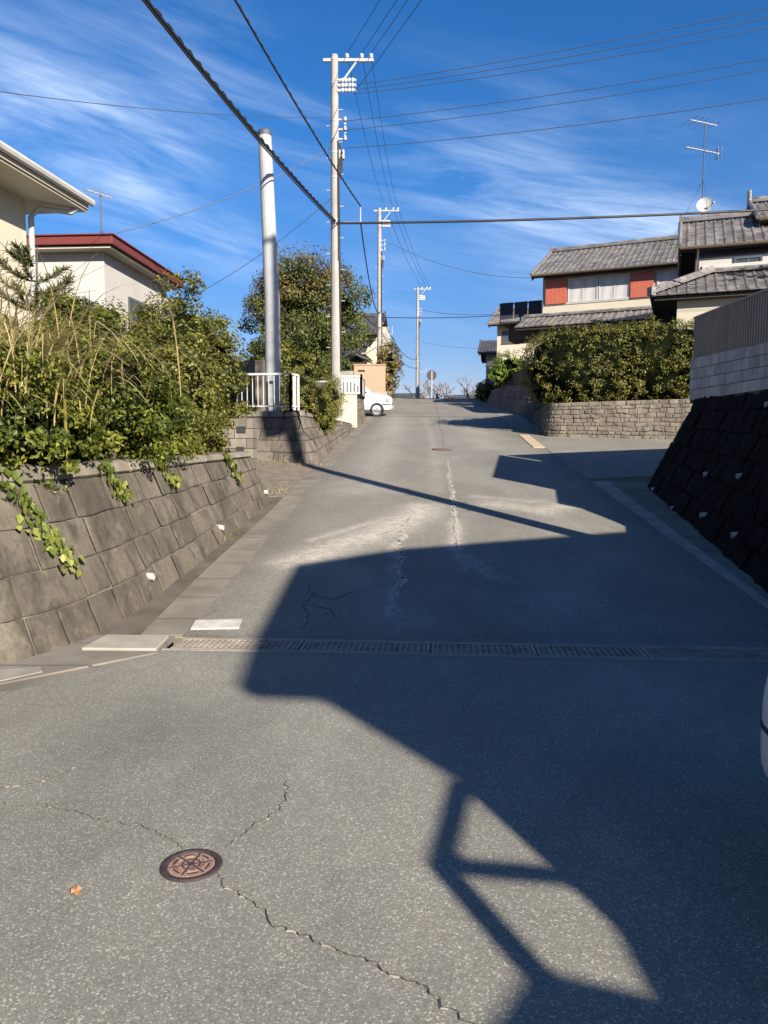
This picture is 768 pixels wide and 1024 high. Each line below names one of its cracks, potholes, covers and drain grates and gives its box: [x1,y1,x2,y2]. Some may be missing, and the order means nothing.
crack [215,872,476,1024]
drain grate [639,647,768,661]
manhole cover [159,848,223,883]
crack [1,765,183,848]
drain grate [534,645,648,658]
crack [374,508,426,619]
drain grate [170,638,304,651]
drain grate [298,640,430,654]
crack [226,780,289,847]
drain grate [431,642,538,656]
crack [300,587,355,628]
crack [435,401,494,580]
